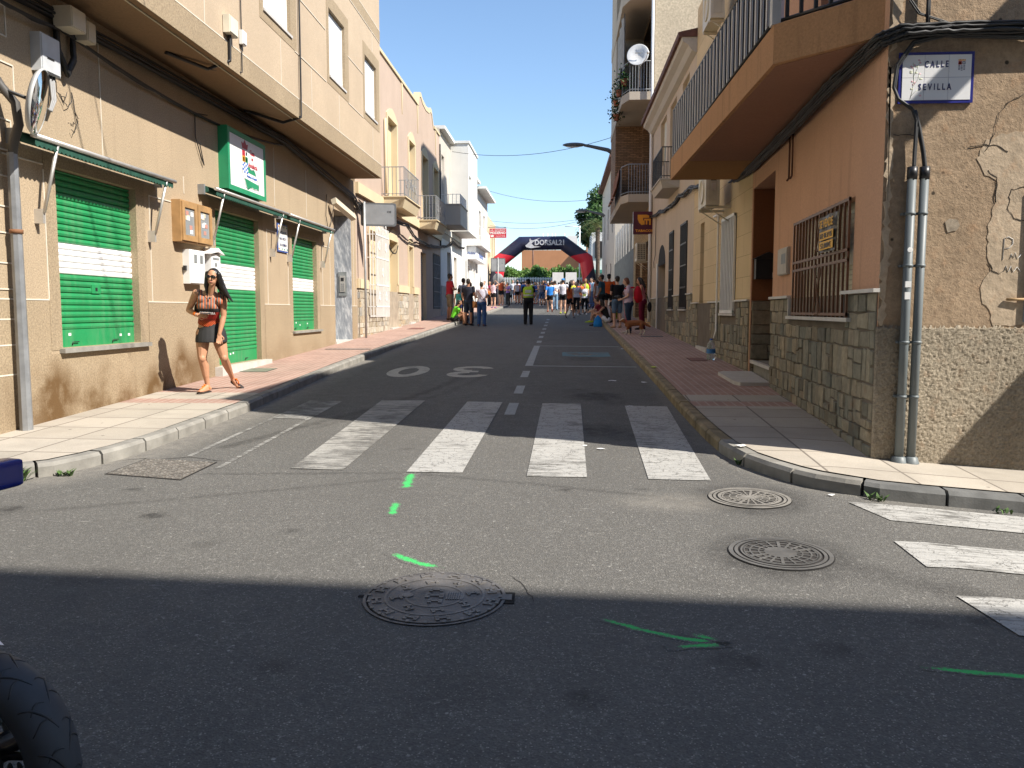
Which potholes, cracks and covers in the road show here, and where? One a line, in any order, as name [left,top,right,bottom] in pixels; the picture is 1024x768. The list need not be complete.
manhole cover [106,458,217,480]
manhole cover [727,537,836,571]
manhole cover [707,488,792,509]
manhole cover [358,572,515,626]
